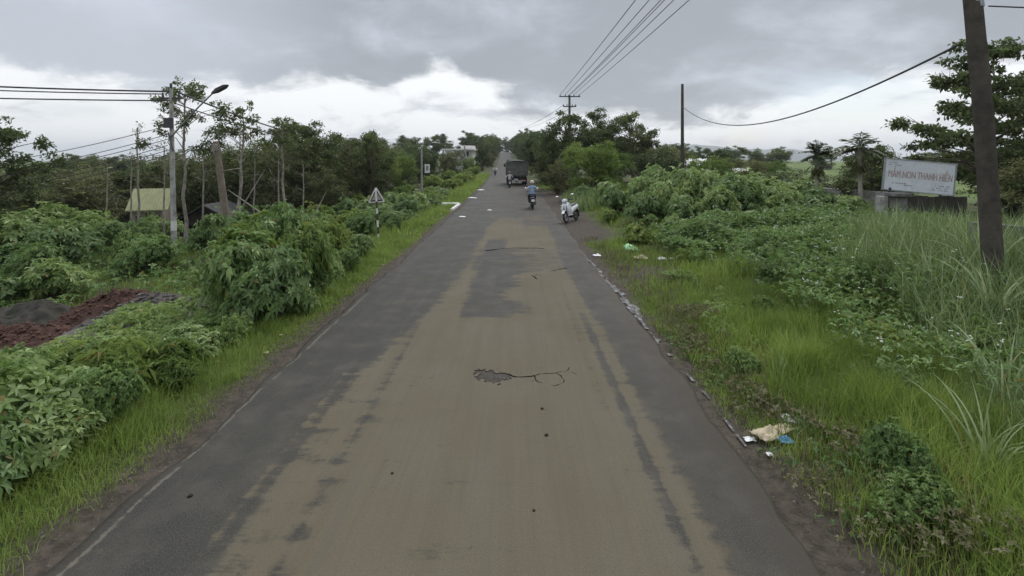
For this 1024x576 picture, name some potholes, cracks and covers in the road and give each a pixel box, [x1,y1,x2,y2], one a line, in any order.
crack [473,368,575,386]
